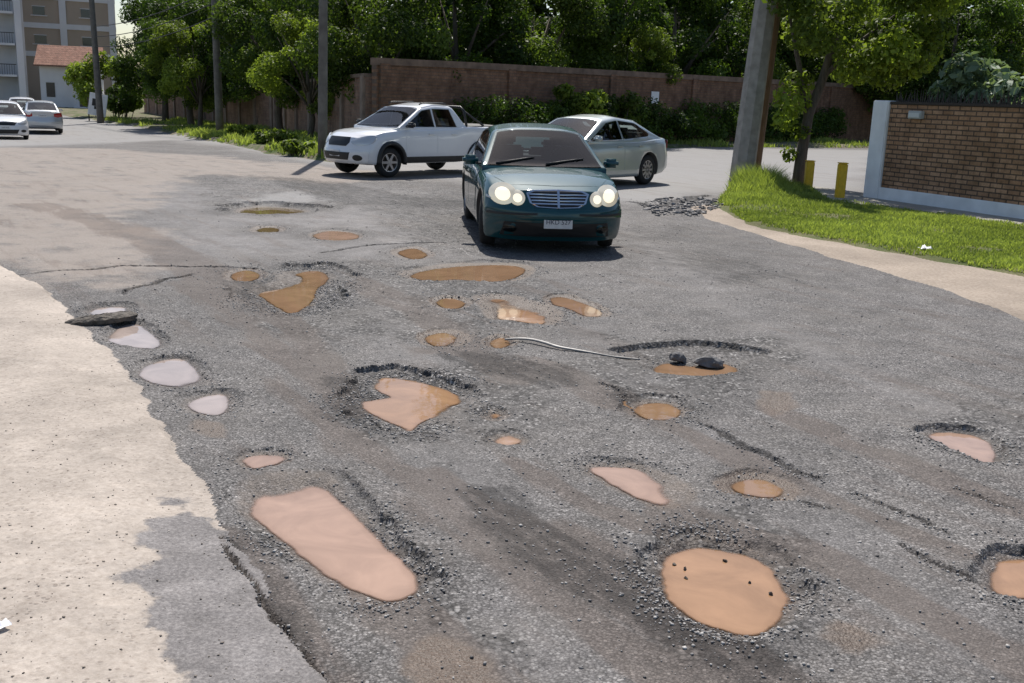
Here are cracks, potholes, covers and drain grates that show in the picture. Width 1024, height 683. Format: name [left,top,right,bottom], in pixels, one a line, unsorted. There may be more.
pothole [333,363,499,436]
pothole [98,318,172,350]
pothole [465,292,569,325]
pothole [635,526,823,642]
pothole [228,447,299,470]
pothole [541,293,615,318]
pothole [302,228,366,241]
pothole [912,422,1011,462]
pothole [220,465,452,607]
pothole [706,467,811,501]
crack [24,265,244,294]
pothole [388,259,544,282]
